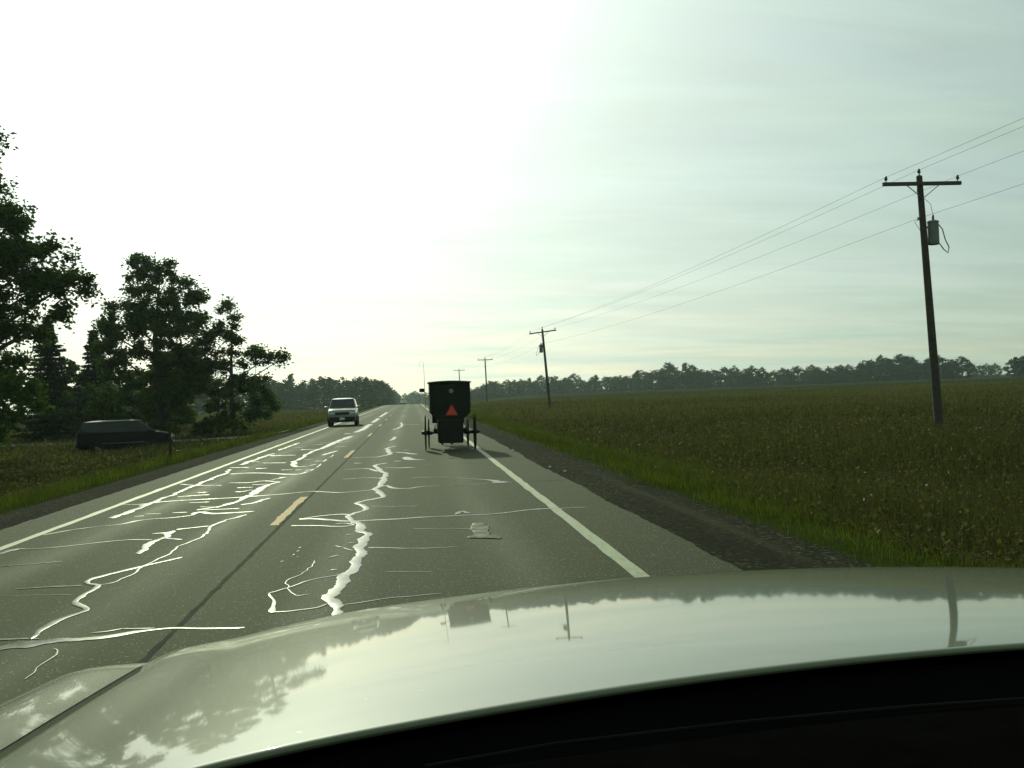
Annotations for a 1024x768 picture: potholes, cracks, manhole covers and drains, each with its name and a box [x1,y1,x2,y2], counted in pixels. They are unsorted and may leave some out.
crack [45,515,191,535]
